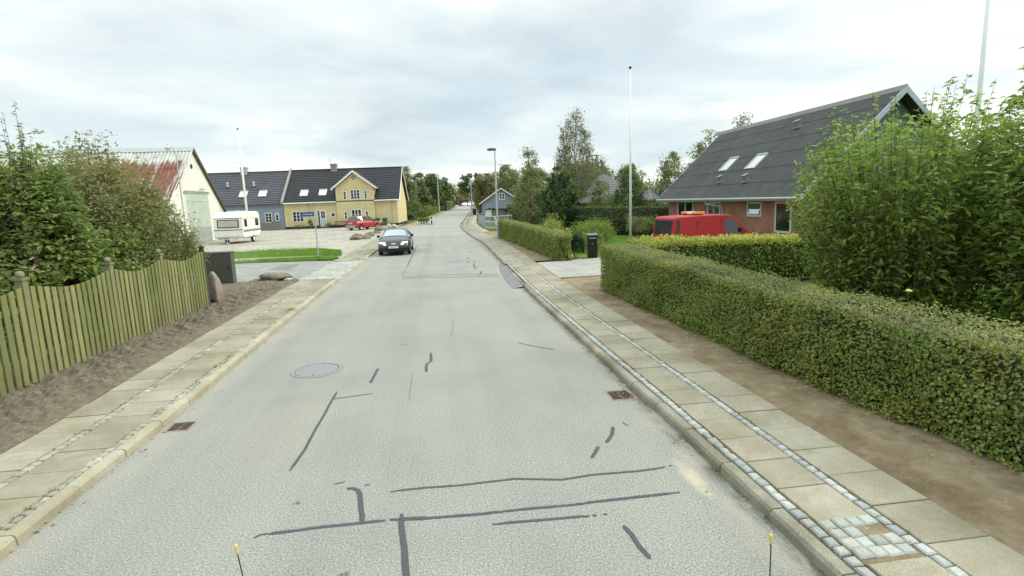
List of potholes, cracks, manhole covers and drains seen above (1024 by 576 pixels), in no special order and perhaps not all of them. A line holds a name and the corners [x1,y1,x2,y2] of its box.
drain grate [163,420,199,433]
drain grate [604,389,637,401]
manhole cover [290,363,343,378]
